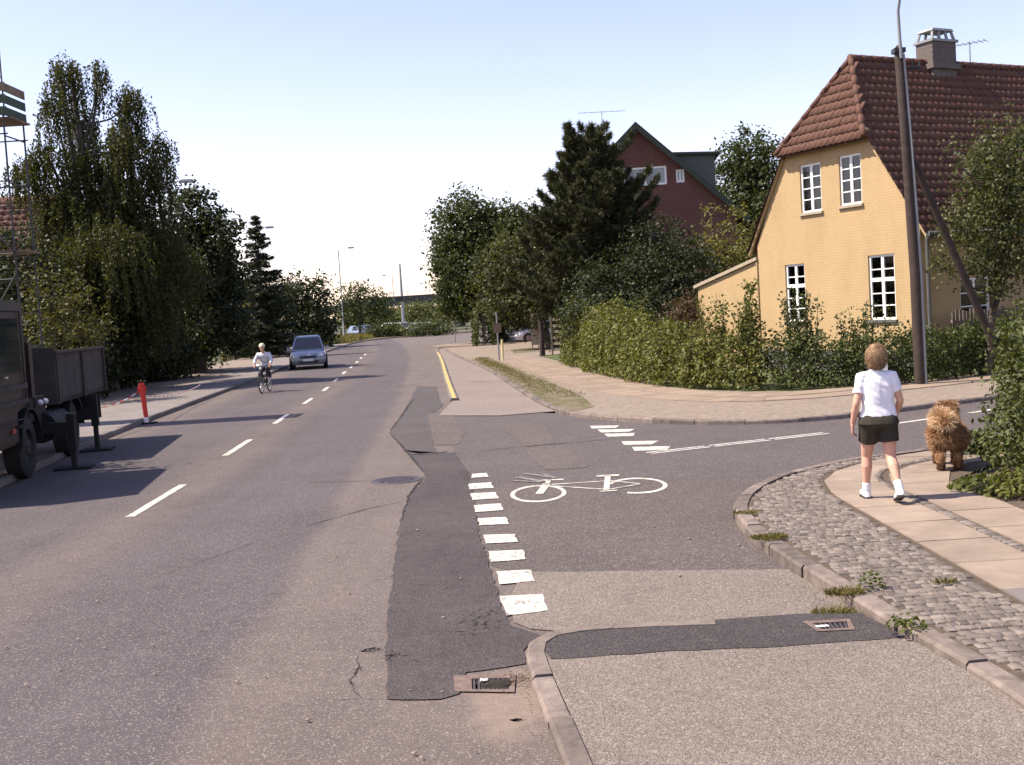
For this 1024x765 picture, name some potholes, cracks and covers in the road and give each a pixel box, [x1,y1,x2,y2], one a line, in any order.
drain grate [802,619,855,631]
crack [341,655,368,700]
manhole cover [371,476,422,484]
drain grate [454,674,517,692]
